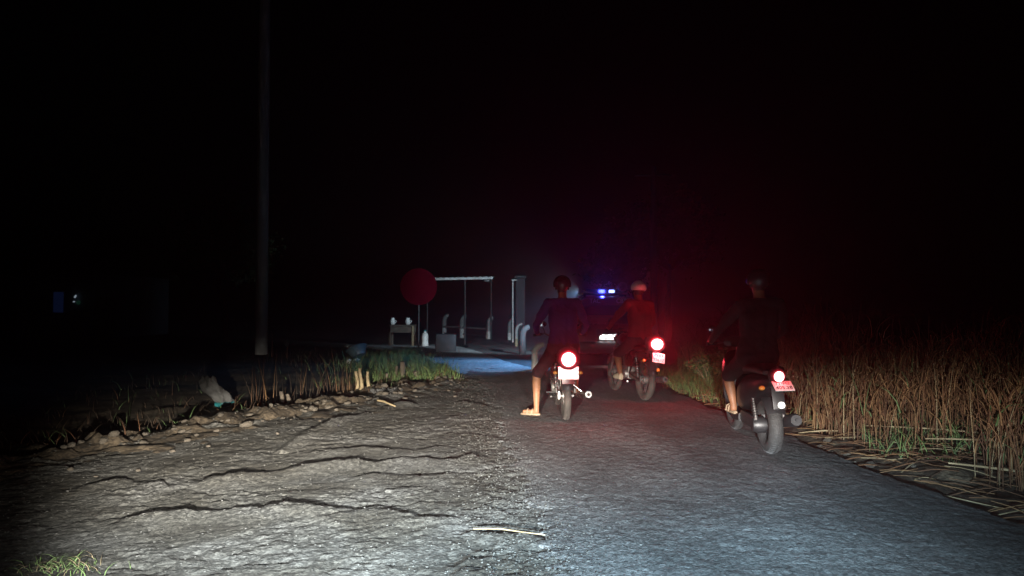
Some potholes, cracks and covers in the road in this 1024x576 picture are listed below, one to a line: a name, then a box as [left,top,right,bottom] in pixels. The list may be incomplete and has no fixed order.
crack [201,444,482,517]
